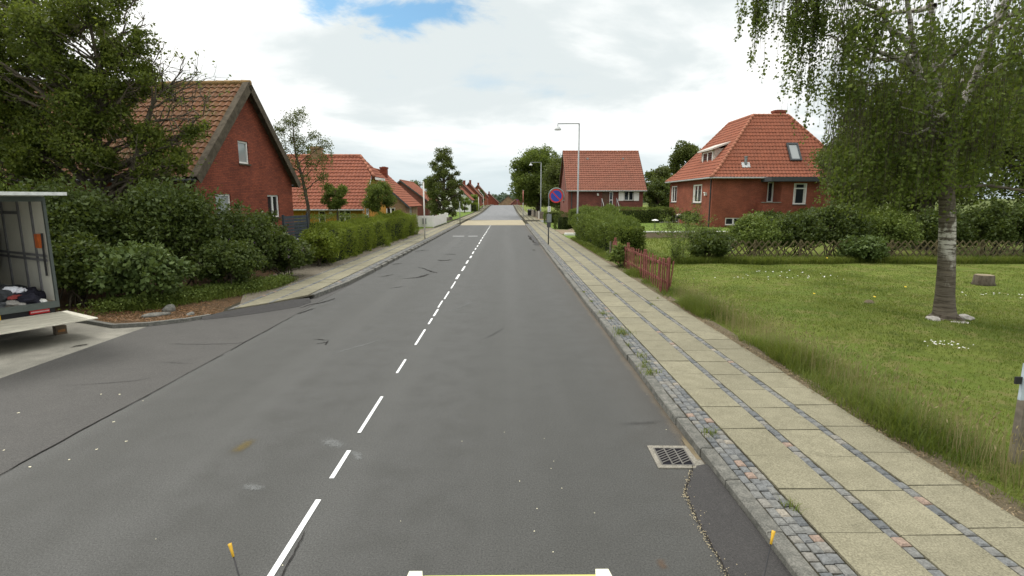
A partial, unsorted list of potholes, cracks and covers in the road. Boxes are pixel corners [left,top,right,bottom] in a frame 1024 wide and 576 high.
drain grate [647,445,704,469]
crack [683,465,728,576]
